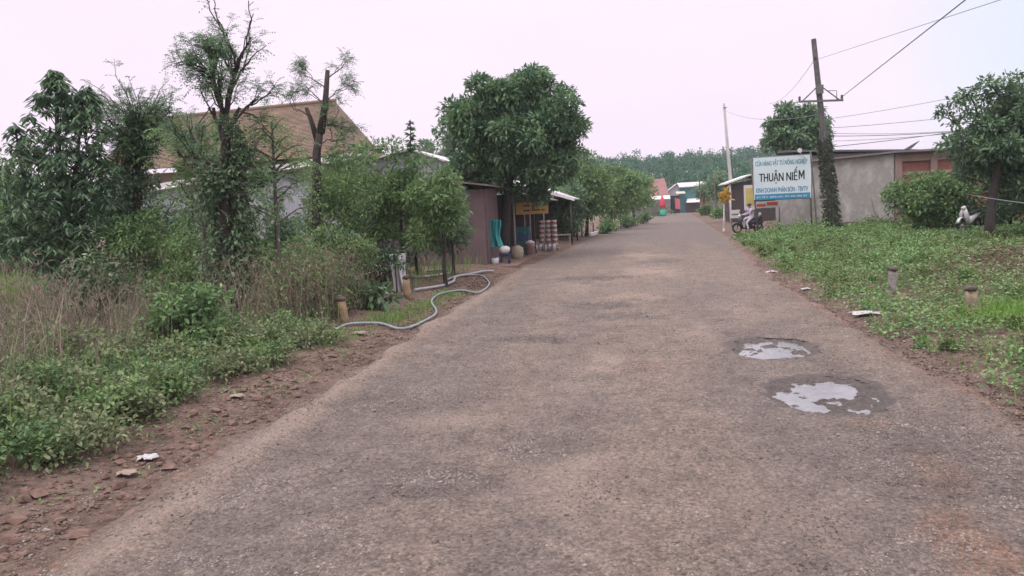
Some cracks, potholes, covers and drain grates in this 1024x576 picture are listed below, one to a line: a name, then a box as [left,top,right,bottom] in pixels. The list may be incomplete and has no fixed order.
pothole [746,371,909,421]
pothole [719,335,832,361]
